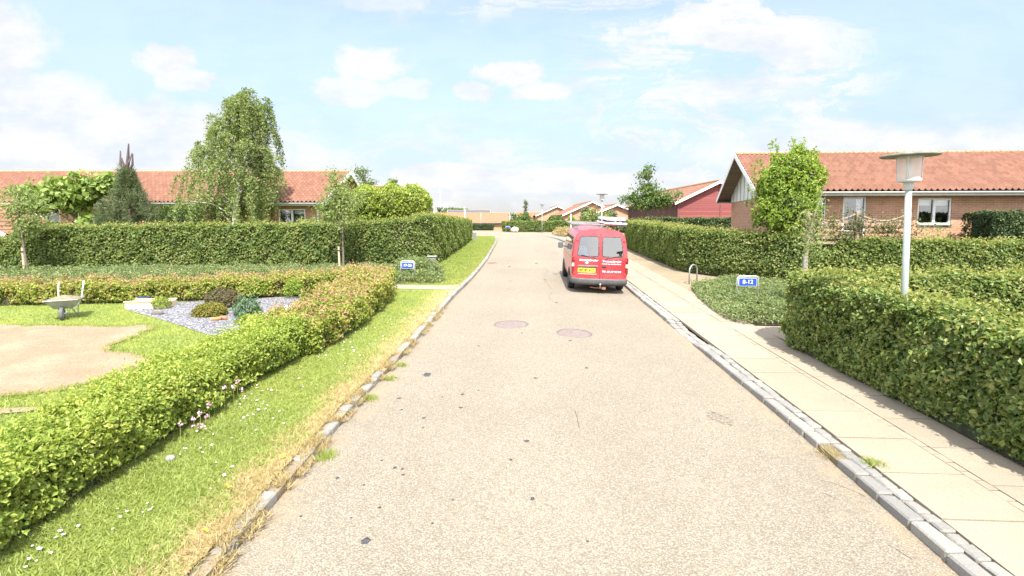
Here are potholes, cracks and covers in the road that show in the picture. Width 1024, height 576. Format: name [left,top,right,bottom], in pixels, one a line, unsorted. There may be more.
manhole cover [556,329,593,338]
